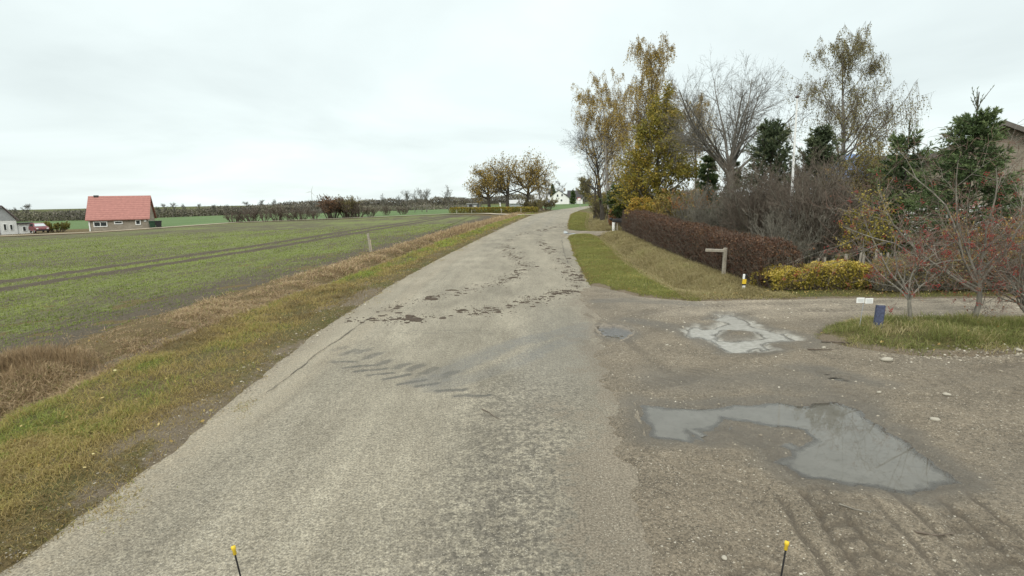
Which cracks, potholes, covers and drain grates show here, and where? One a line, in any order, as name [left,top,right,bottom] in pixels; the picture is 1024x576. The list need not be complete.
pothole [593,324,635,340]
crack [267,317,371,392]
